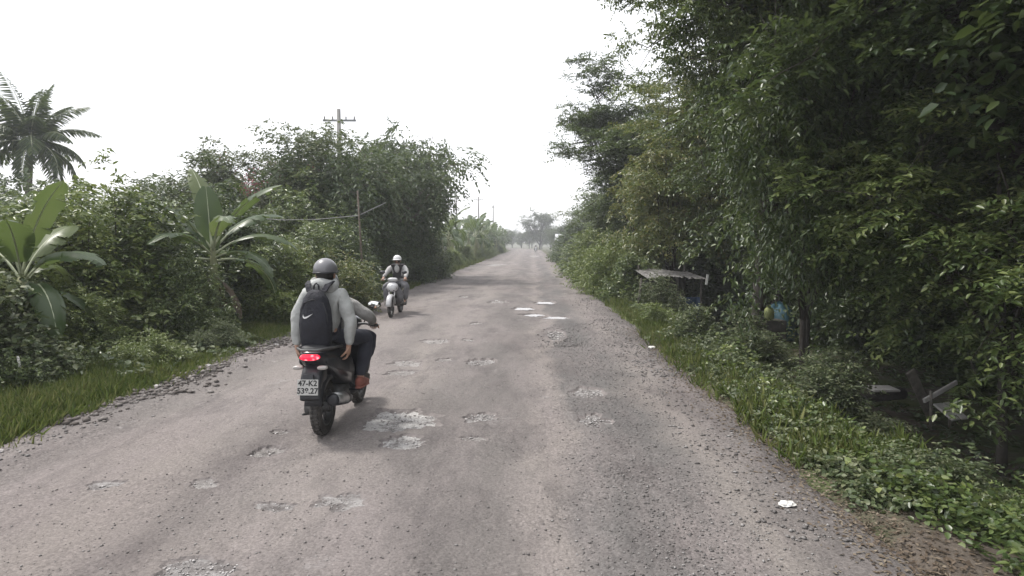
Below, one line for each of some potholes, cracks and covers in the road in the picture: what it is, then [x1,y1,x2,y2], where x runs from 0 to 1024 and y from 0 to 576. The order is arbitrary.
pothole [188,476,220,489]
pothole [576,412,615,429]
pothole [84,480,128,490]
pothole [386,359,424,367]
pothole [567,386,608,398]
pothole [251,501,300,513]
pothole [461,411,501,423]
pothole [463,357,497,366]
pothole [547,330,567,341]
pothole [310,491,369,513]
pothole [356,408,446,433]
pothole [150,555,248,576]
